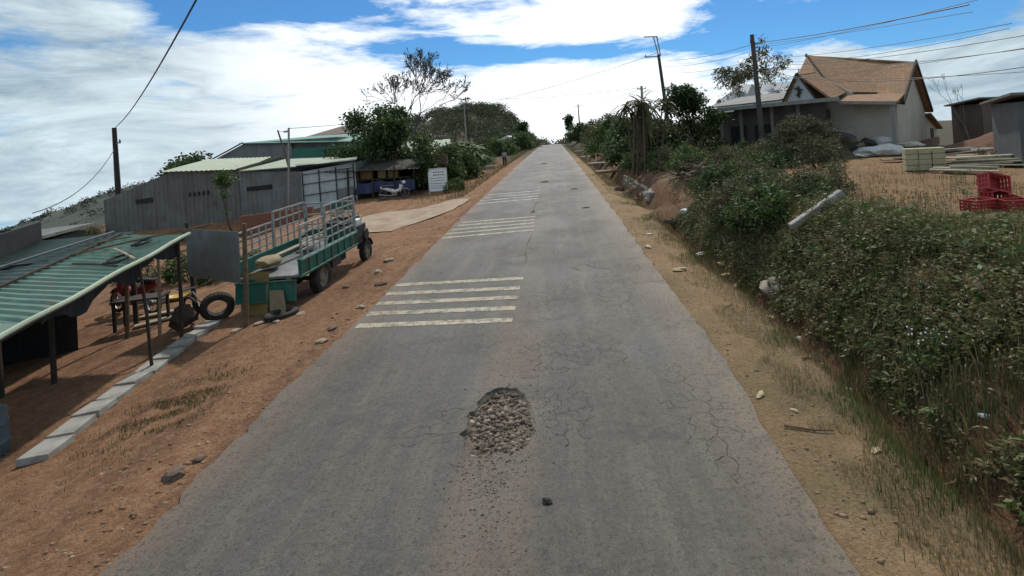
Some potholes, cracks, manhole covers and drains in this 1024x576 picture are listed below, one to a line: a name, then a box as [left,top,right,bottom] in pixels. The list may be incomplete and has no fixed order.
crack [522,333,627,447]
crack [369,406,474,447]
pothole [459,387,536,458]
crack [658,366,745,483]
